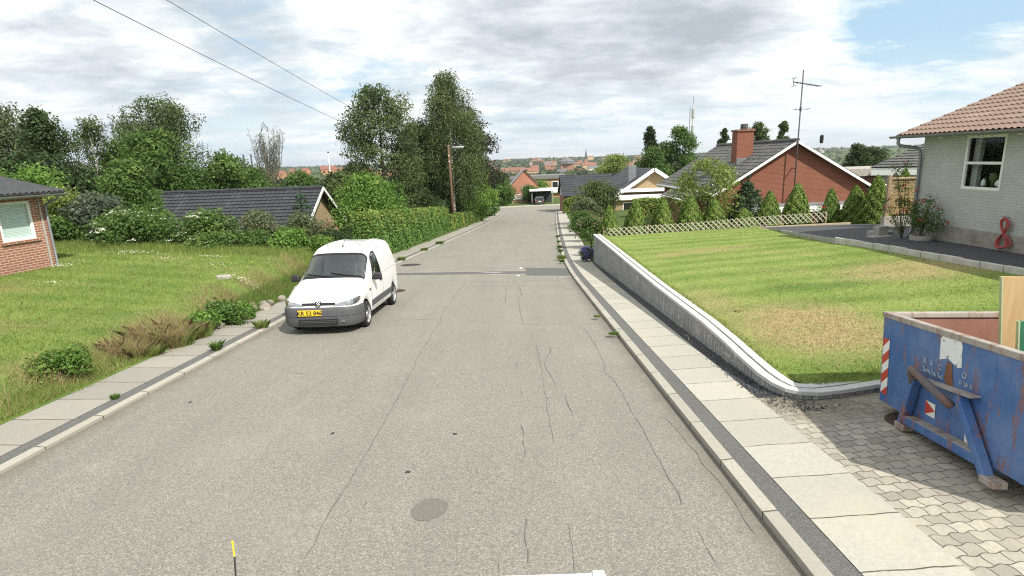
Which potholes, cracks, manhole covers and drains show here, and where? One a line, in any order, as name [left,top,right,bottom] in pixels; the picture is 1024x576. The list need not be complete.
crack [537,347,572,441]
crack [665,418,754,532]
